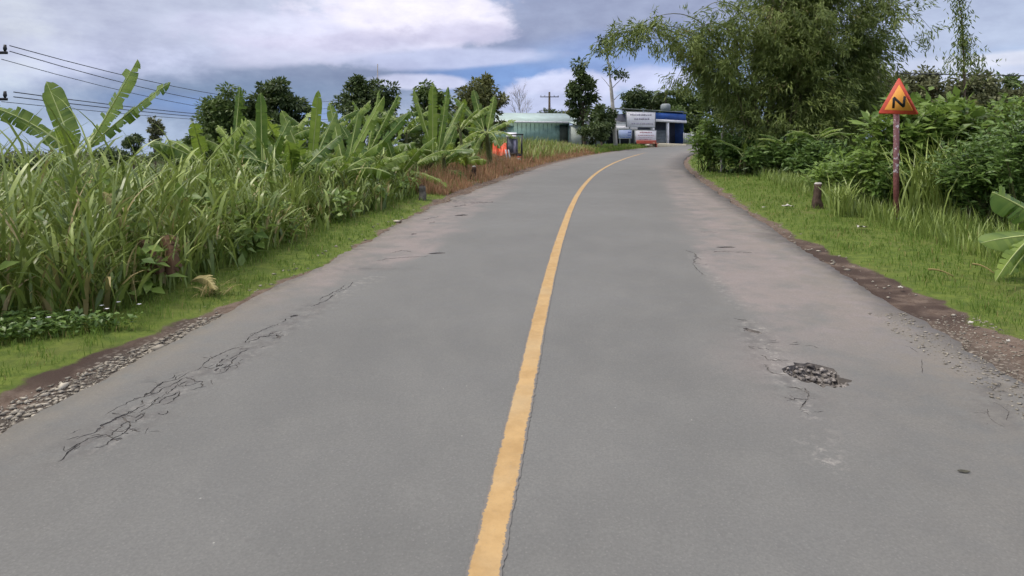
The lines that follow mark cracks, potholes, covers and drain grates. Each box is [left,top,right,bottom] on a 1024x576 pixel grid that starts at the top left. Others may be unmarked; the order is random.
pothole [782,362,852,388]
crack [60,315,297,461]
crack [749,340,822,415]
